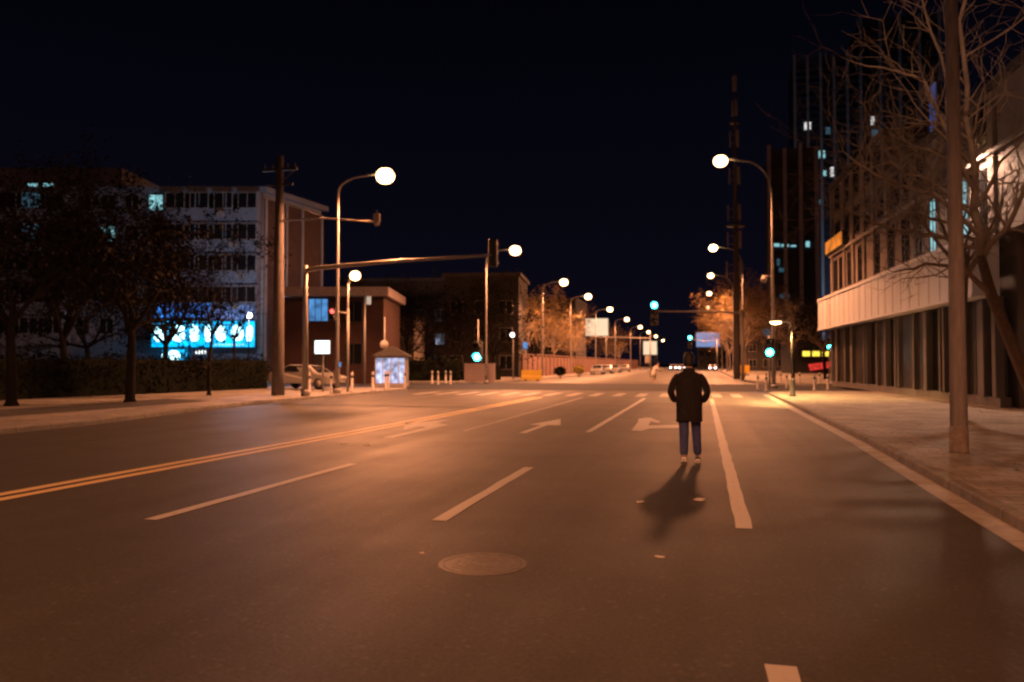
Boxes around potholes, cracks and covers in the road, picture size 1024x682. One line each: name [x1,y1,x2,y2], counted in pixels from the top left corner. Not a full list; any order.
manhole cover [438,553,527,576]
